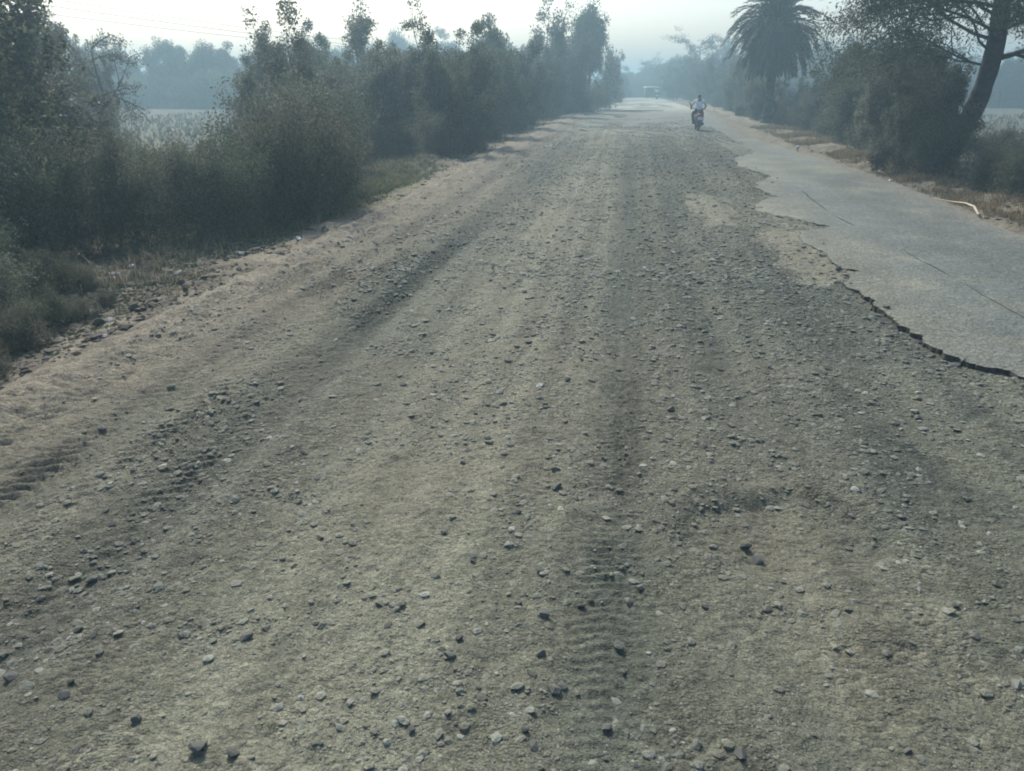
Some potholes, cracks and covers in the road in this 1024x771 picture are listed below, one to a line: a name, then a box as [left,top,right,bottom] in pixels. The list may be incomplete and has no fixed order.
crack [803,191,1024,318]
